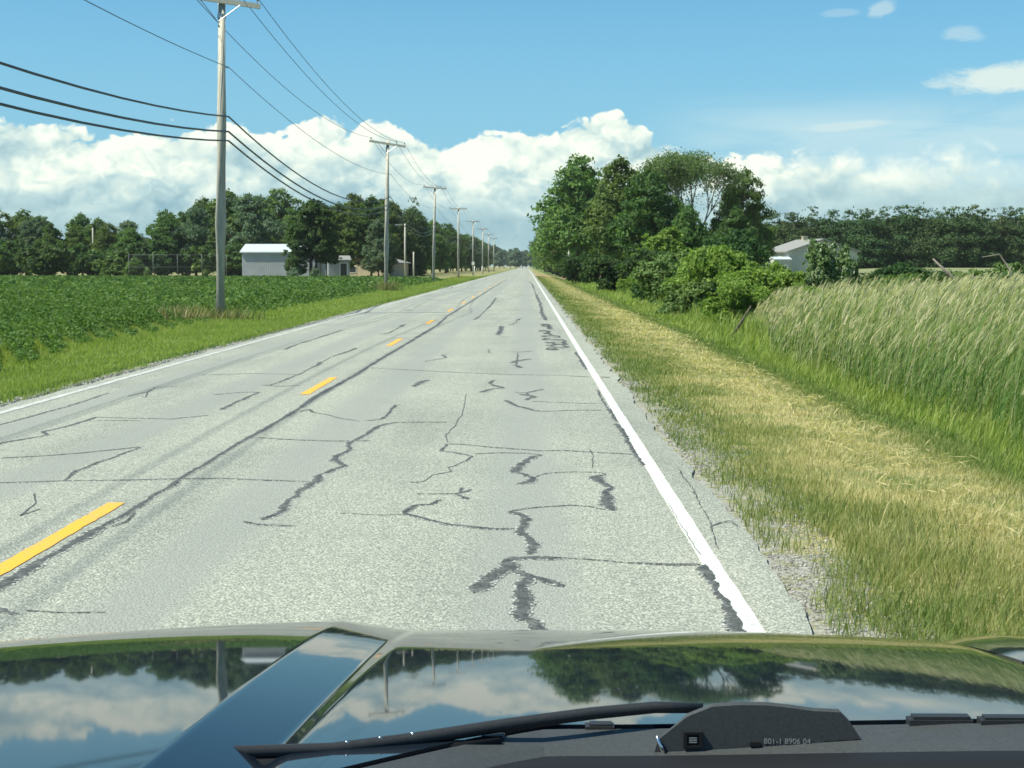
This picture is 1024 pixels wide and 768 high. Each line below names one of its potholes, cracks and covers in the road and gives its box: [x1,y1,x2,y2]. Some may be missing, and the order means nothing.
crack [0,280,747,632]
